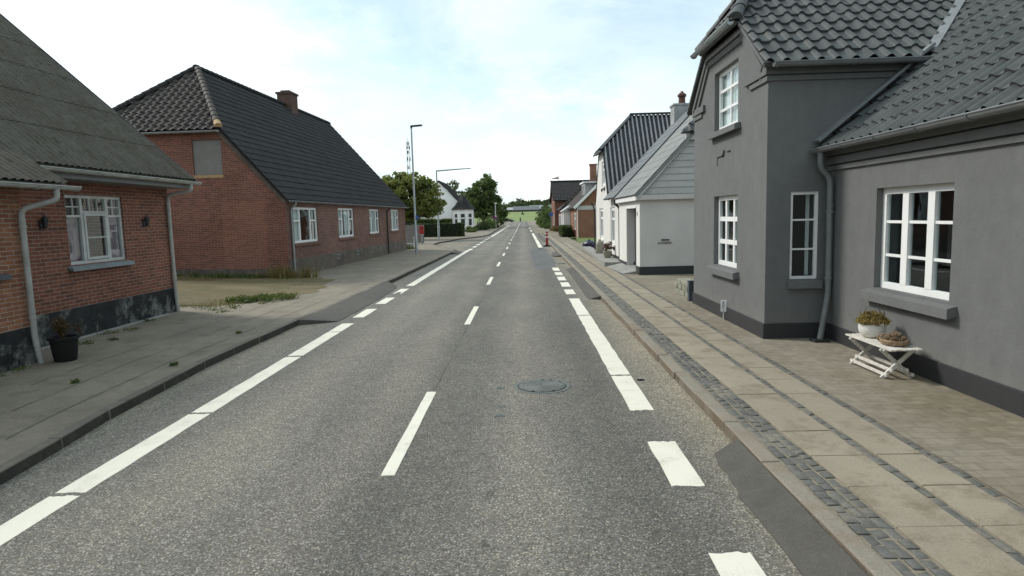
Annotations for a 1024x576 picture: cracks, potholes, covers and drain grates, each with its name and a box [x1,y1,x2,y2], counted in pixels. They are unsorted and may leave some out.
manhole cover [513,379,571,394]
